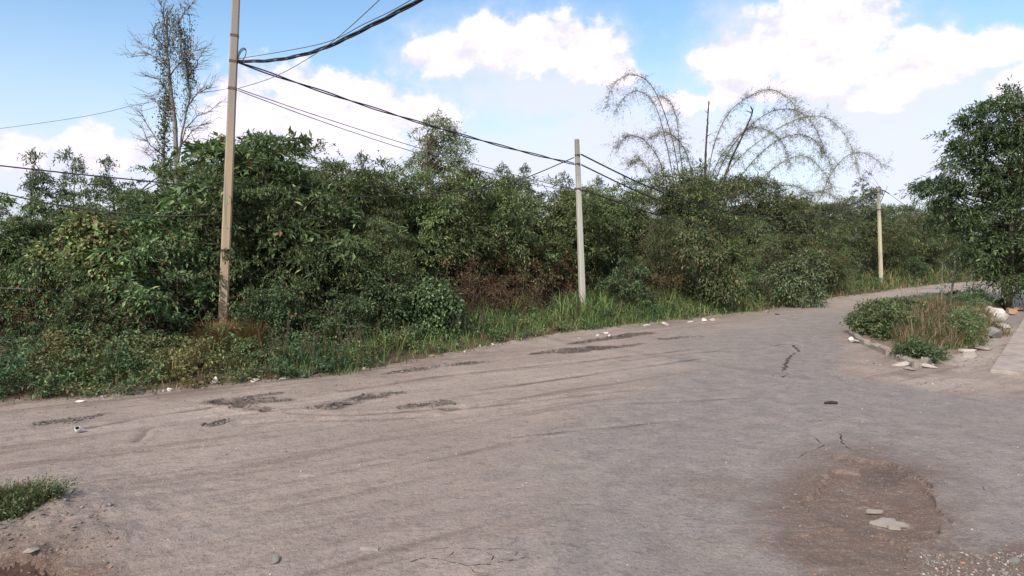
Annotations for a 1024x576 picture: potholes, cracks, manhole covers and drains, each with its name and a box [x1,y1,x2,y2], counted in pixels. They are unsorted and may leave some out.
pothole [557,331,663,346]
crack [403,544,532,576]
pothole [197,391,302,414]
crack [762,342,807,379]
pothole [520,342,652,356]
pothole [296,399,373,411]
pothole [337,390,411,404]
pothole [389,399,464,413]
crack [791,417,881,460]
pothole [375,364,448,378]
pothole [193,418,241,429]
pothole [762,452,969,576]
